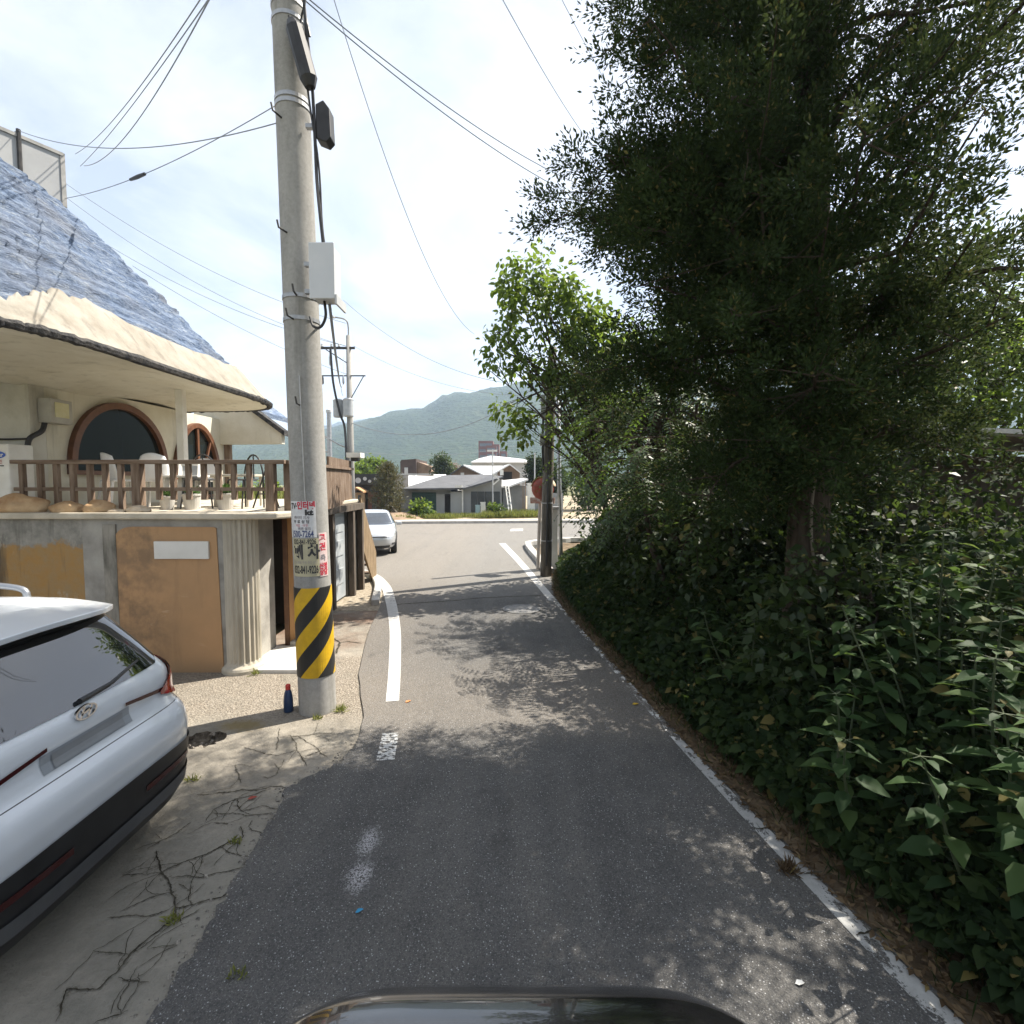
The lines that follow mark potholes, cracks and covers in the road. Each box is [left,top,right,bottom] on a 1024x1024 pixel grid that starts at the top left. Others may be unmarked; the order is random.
pothole [188,731,227,749]
crack [56,723,326,1024]
